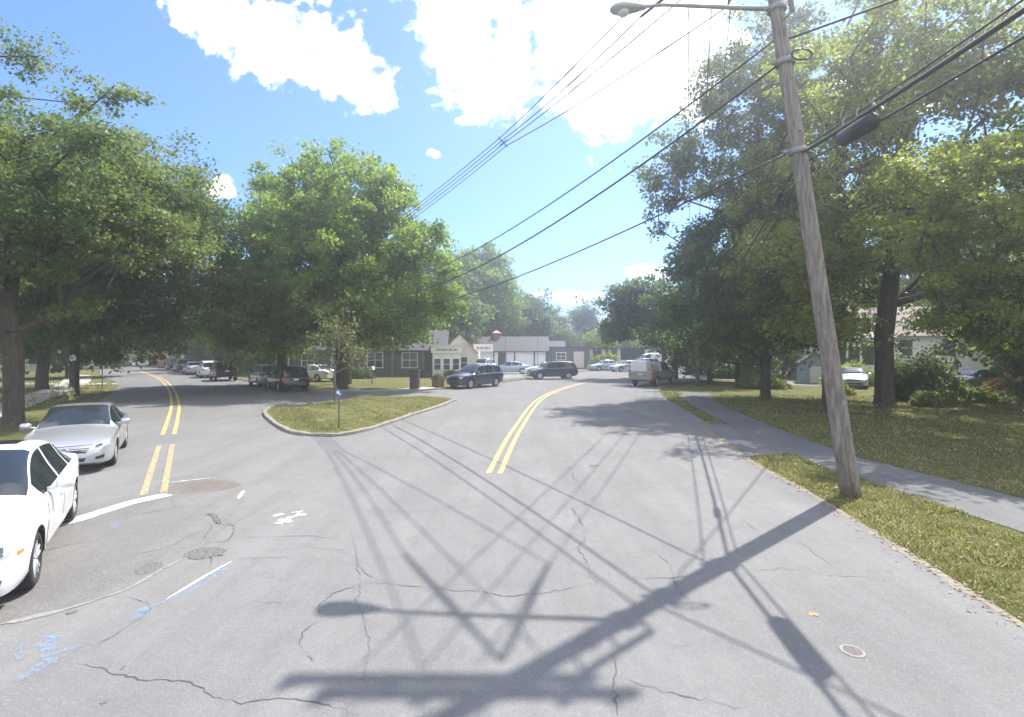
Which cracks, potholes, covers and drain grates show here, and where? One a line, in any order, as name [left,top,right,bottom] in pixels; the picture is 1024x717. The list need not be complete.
manhole cover [168,480,241,493]
crack [51,597,347,711]
manhole cover [839,644,866,658]
crack [612,655,740,715]
crack [141,467,607,693]
